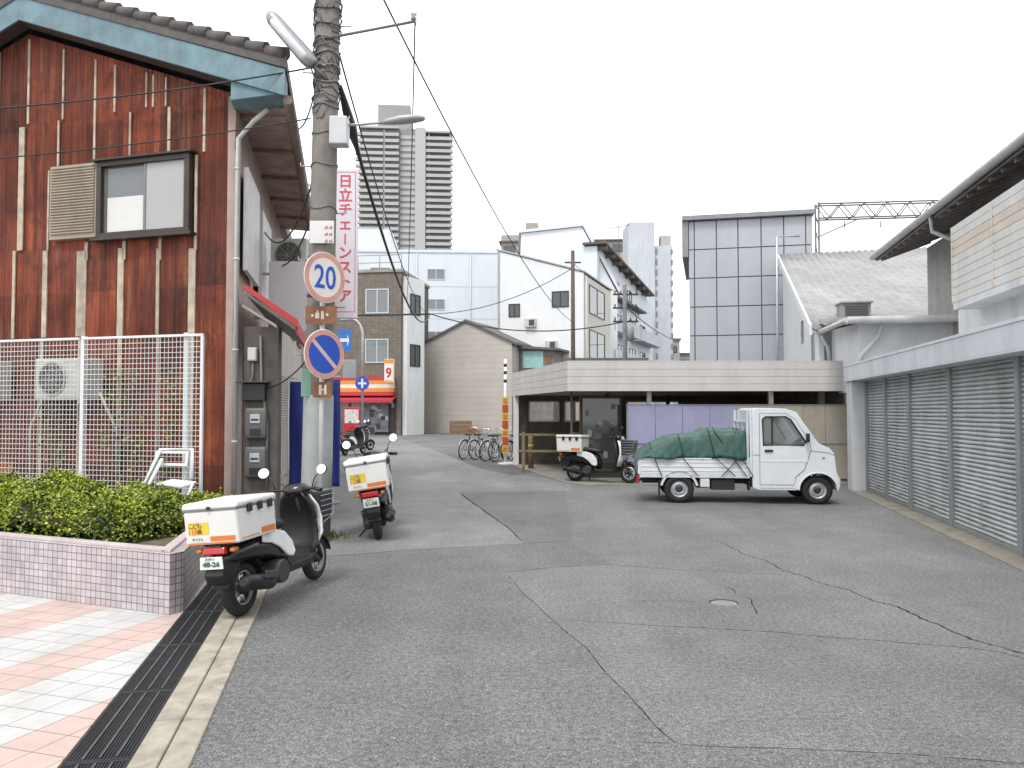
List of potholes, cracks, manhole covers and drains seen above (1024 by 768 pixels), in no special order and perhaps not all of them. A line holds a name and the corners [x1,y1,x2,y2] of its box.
drain grate [185,587,225,612]
drain grate [120,643,203,693]
drain grate [157,610,223,646]
drain grate [63,689,175,764]
crack [513,581,1024,764]
crack [417,491,523,542]
crack [585,541,1024,659]
drain grate [59,758,132,768]
